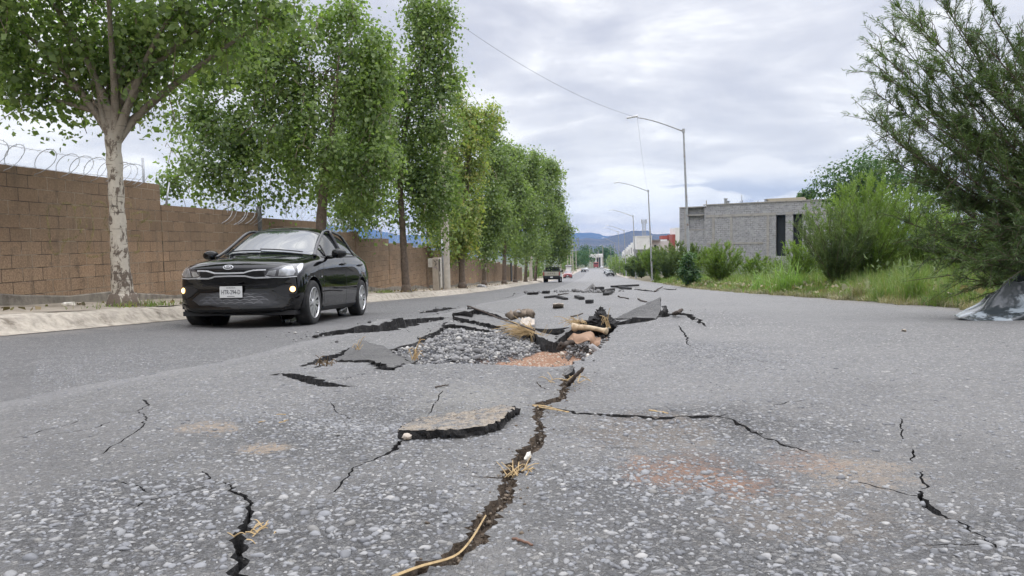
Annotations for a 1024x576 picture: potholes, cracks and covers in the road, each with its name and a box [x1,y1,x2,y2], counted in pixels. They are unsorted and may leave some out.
crack [613,313,706,350]
crack [15,400,150,454]
crack [272,307,455,419]
crack [121,471,254,576]
crack [329,441,403,494]
pothole [390,320,620,367]
crack [859,419,997,548]
crack [401,366,807,576]
